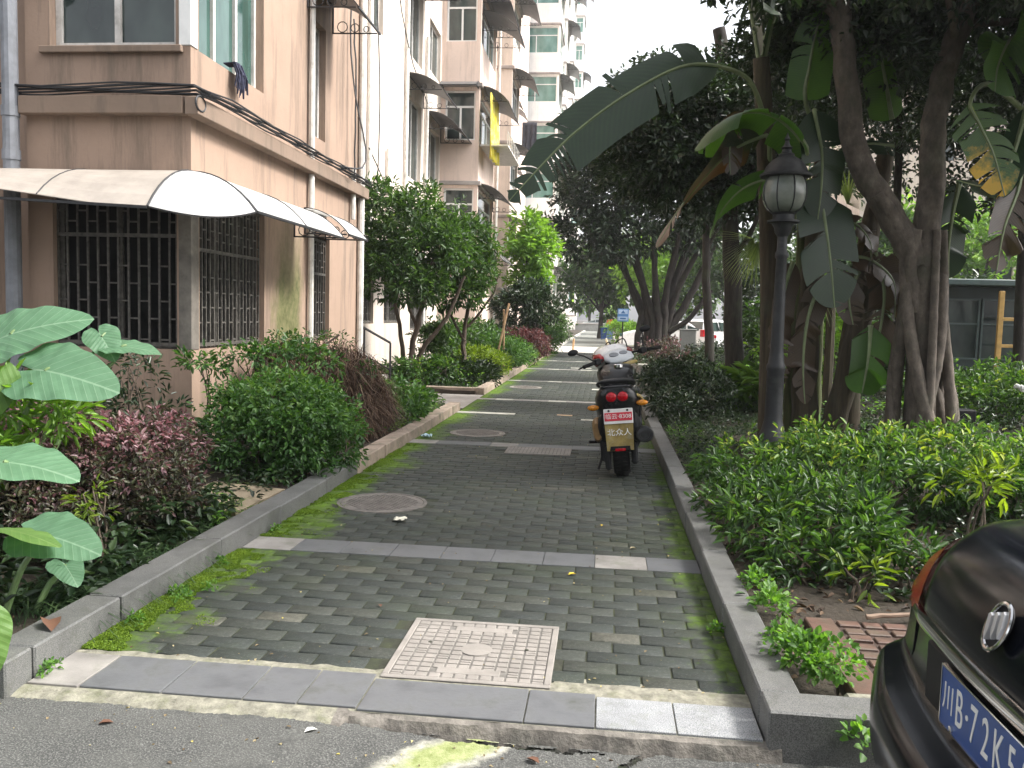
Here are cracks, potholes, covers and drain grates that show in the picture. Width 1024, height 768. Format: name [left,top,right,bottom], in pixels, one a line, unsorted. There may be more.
crack [467,741,641,768]
manhole cover [449,429,508,438]
manhole cover [377,618,567,690]
manhole cover [502,446,575,457]
manhole cover [332,493,431,515]
